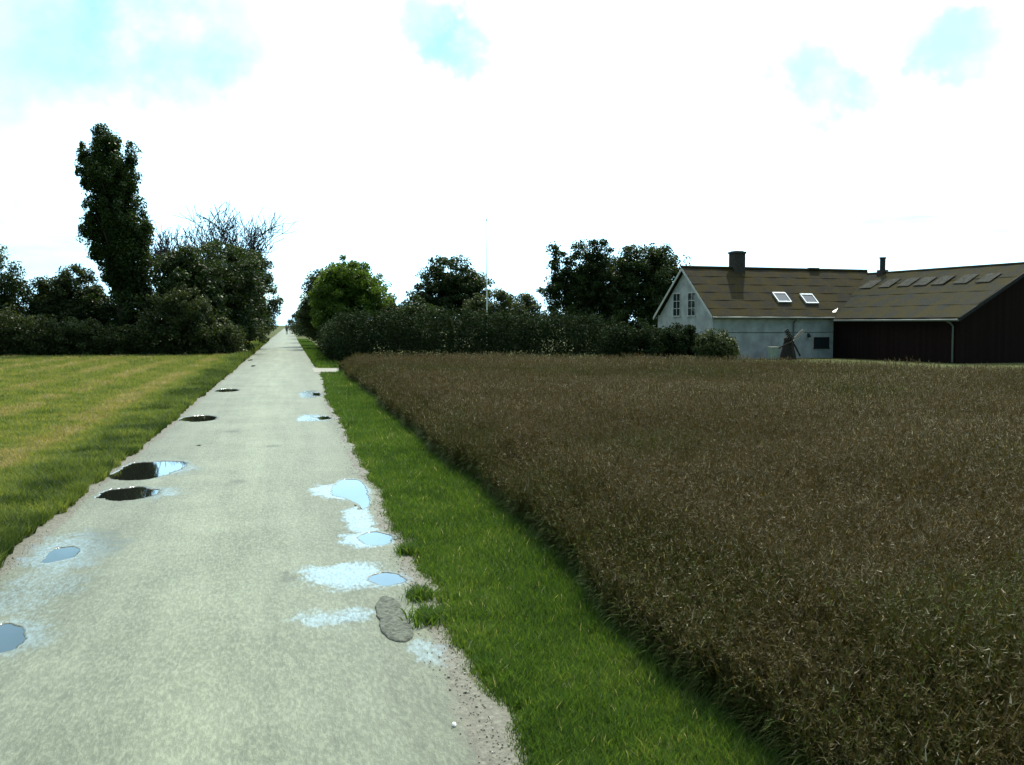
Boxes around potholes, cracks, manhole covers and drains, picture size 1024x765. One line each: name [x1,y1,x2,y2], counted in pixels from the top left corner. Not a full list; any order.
pothole [176,415,224,423]
pothole [0,617,52,660]
pothole [28,543,96,566]
pothole [102,459,196,482]
pothole [349,568,432,590]
pothole [81,484,174,503]
pothole [317,478,384,510]
pothole [341,528,414,549]
